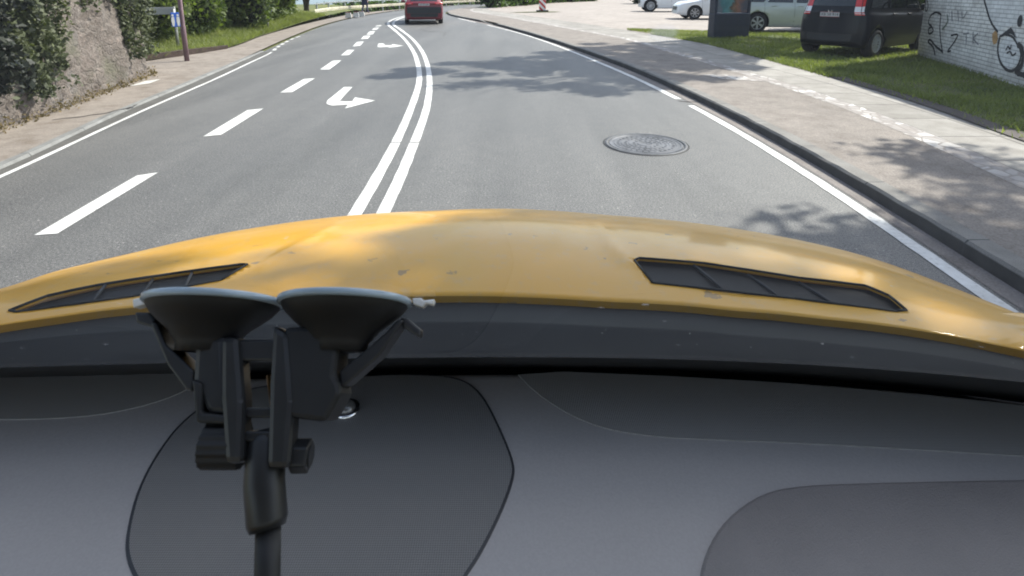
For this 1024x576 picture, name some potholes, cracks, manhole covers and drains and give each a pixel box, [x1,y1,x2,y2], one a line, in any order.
manhole cover [603,133,690,156]
